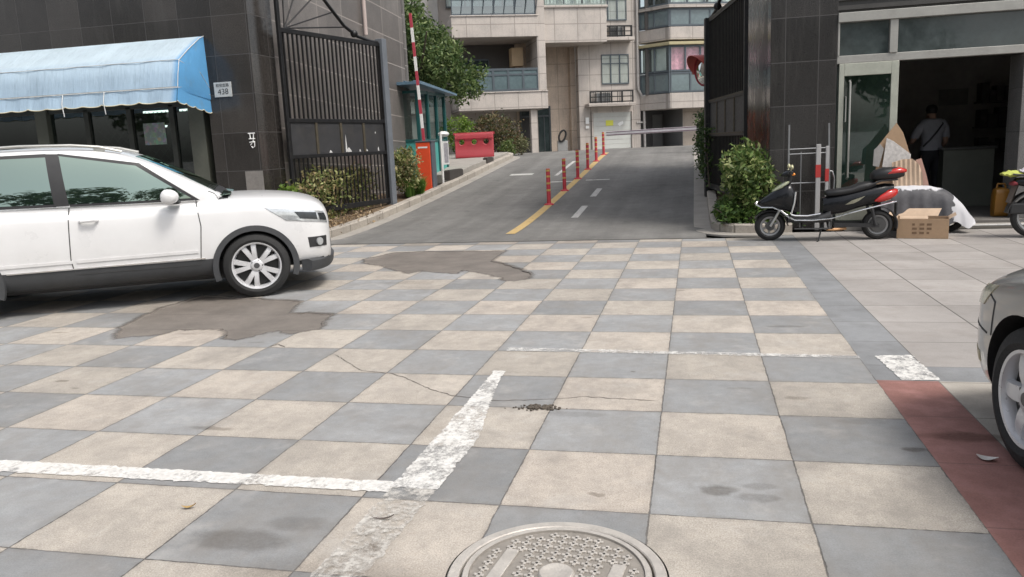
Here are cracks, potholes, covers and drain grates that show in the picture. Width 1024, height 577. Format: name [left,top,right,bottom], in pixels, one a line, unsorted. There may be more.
manhole cover [447,522,667,577]
crack [337,355,656,401]
